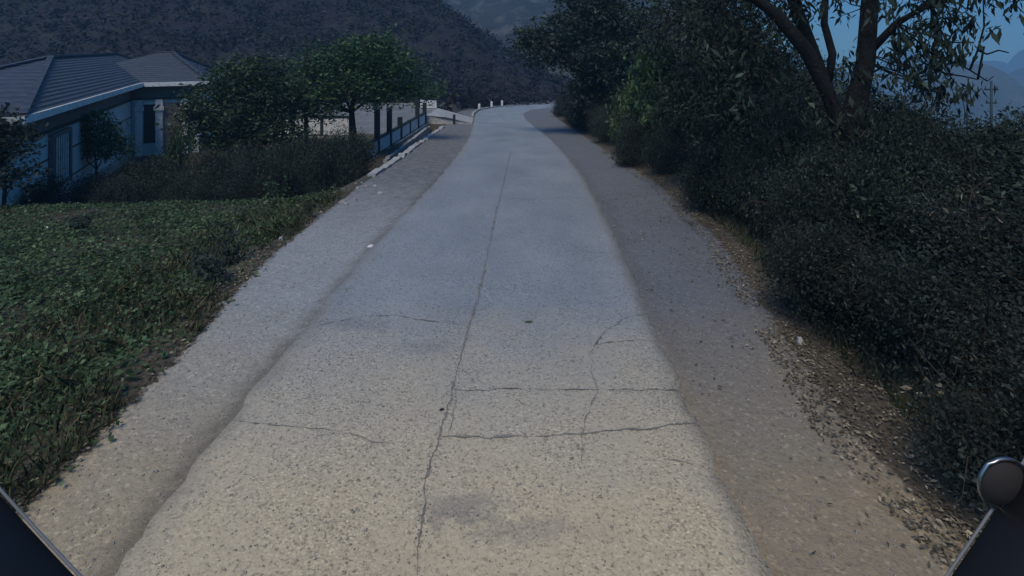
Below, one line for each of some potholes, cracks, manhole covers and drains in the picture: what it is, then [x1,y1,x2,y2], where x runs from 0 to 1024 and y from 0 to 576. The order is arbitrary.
crack [235,419,393,444]
crack [443,313,698,463]
